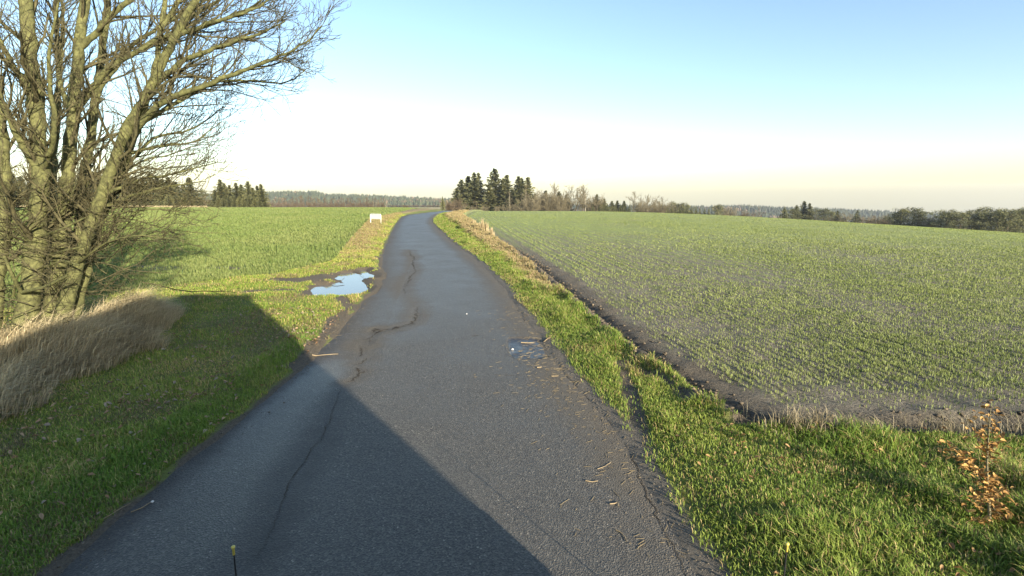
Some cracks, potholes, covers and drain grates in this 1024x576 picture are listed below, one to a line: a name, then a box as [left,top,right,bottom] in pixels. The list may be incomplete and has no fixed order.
pothole [508,338,546,359]
crack [348,250,418,382]
